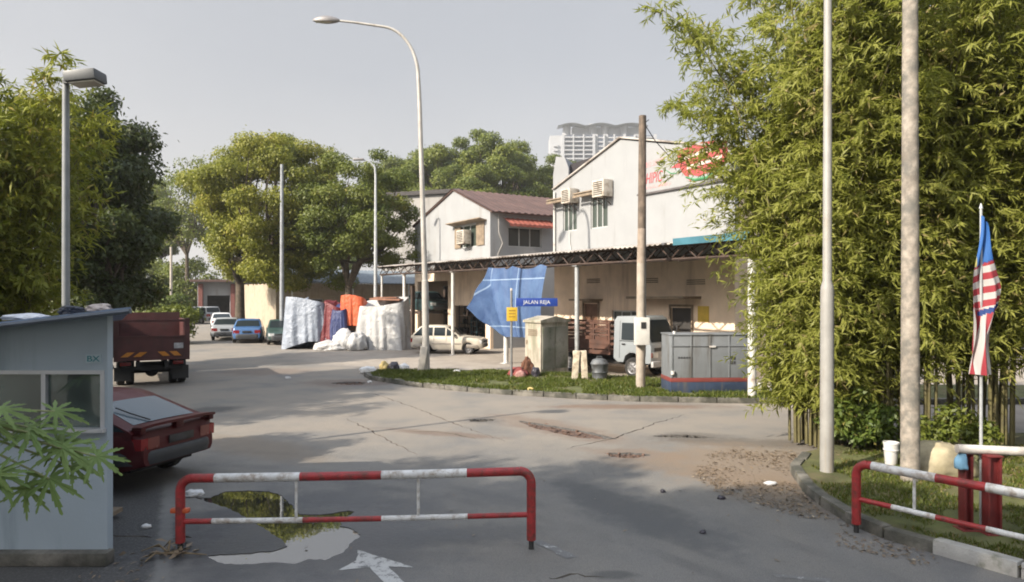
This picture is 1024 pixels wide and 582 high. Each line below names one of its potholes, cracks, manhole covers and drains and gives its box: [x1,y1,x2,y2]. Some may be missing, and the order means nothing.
crack [348,393,504,454]
pothole [520,421,617,440]
crack [568,417,675,449]
